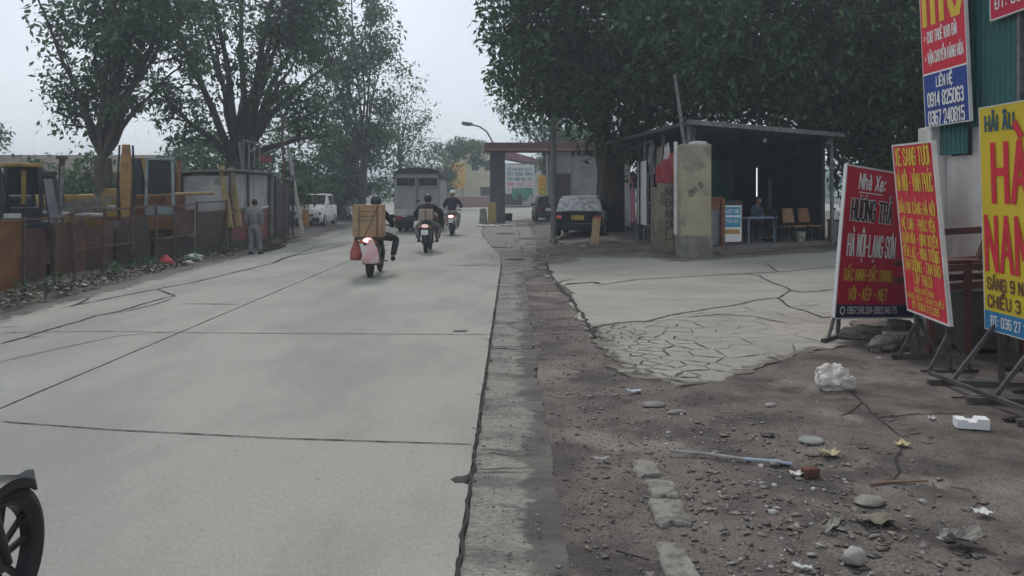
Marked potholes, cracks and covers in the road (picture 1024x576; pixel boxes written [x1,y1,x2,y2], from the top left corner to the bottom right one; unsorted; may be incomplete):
crack [0,241,352,362]
crack [565,263,836,384]
